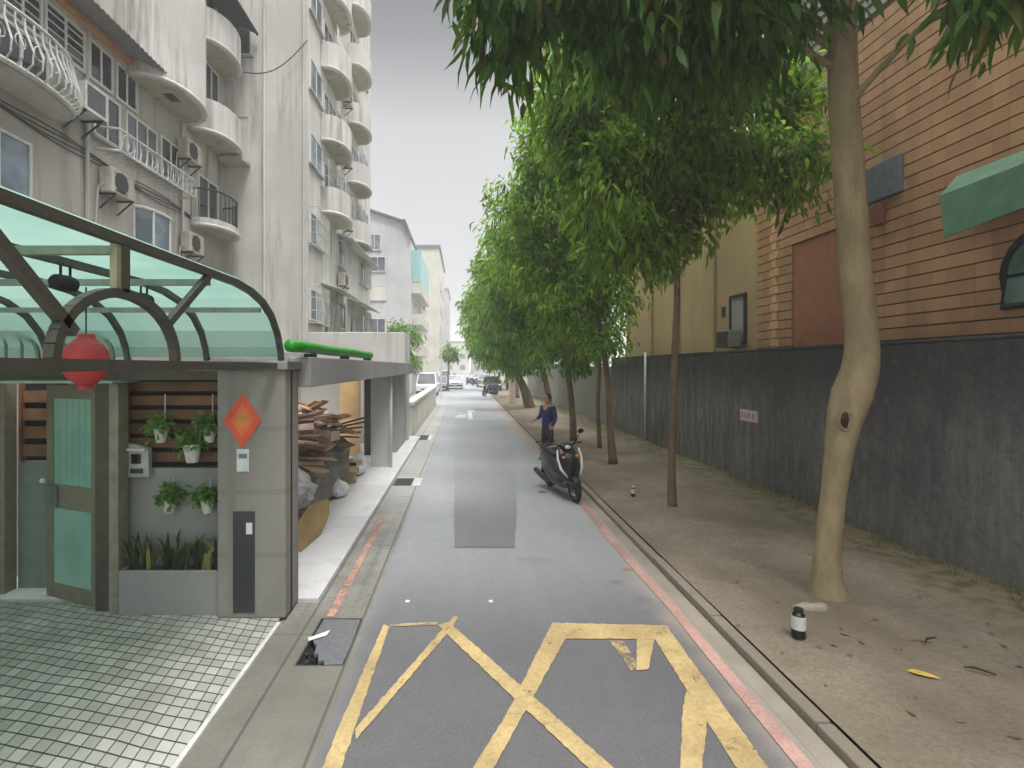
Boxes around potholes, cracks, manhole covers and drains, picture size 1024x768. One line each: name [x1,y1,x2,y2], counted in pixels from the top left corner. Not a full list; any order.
manhole cover [294,618,363,666]
